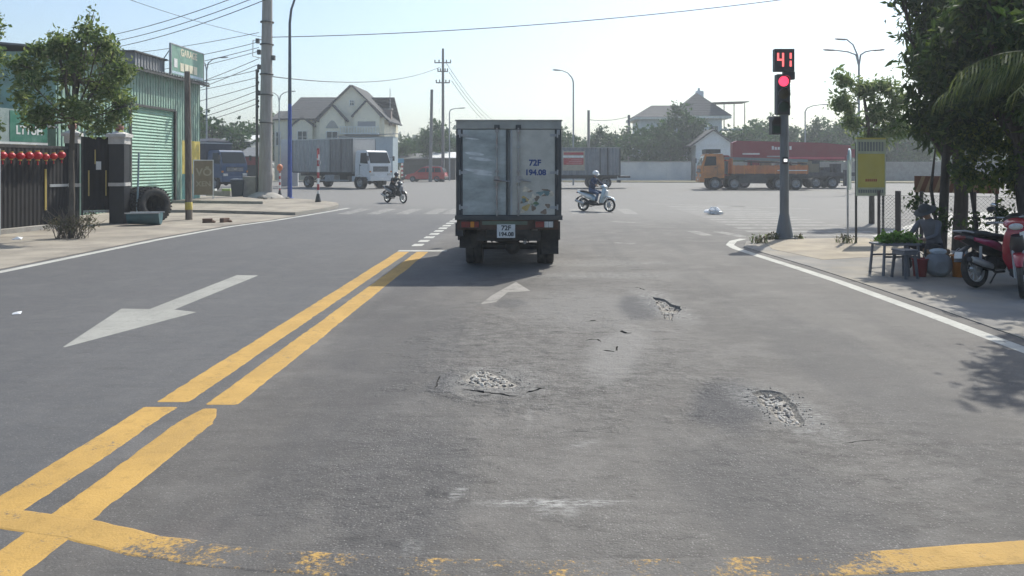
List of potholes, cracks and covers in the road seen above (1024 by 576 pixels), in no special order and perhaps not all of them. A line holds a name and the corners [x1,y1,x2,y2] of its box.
pothole [648,295,686,321]
crack [466,388,542,396]
pothole [742,387,830,430]
pothole [452,368,530,391]
